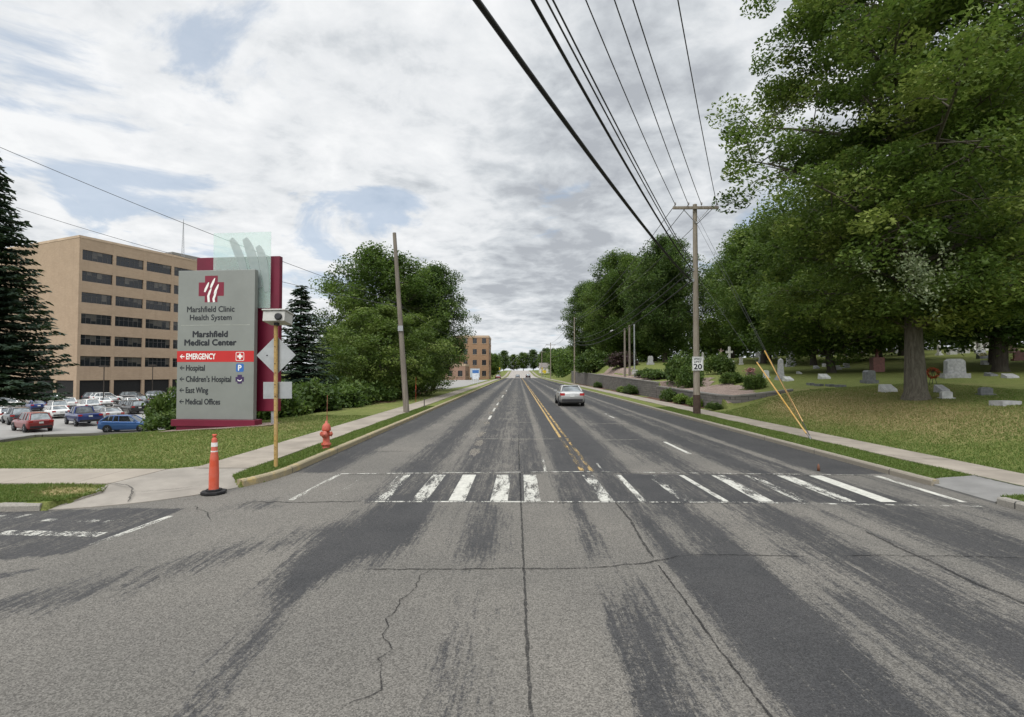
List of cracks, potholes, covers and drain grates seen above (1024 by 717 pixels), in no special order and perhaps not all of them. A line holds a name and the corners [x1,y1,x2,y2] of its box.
crack [341,555,773,717]
crack [852,530,1024,604]
